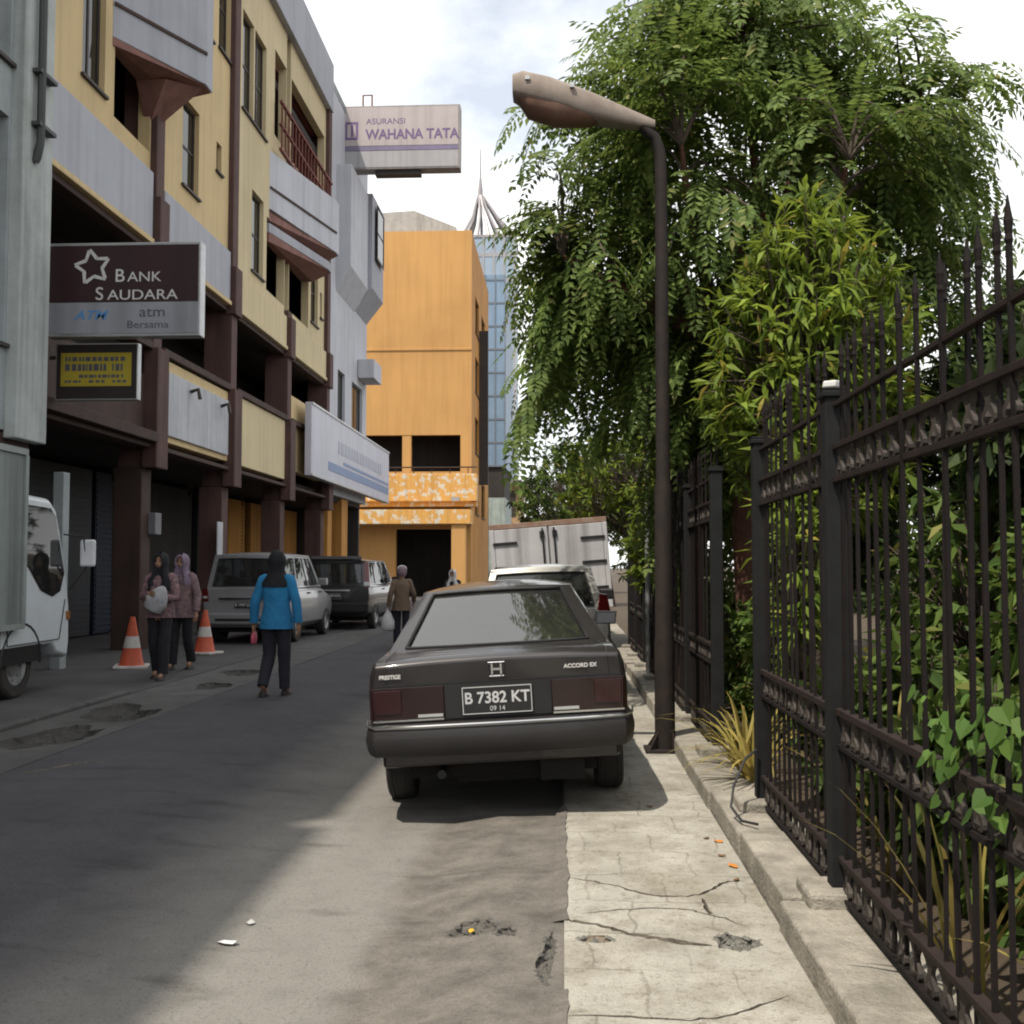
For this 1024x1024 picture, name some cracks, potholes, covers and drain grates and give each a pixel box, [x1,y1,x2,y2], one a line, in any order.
pothole [534,927,558,986]
pothole [79,702,162,723]
pothole [575,935,616,943]
crack [569,878,744,946]
pothole [493,925,517,936]
pothole [712,931,763,952]
pothole [0,723,107,750]
crack [578,996,787,1021]
pothole [444,917,501,938]
